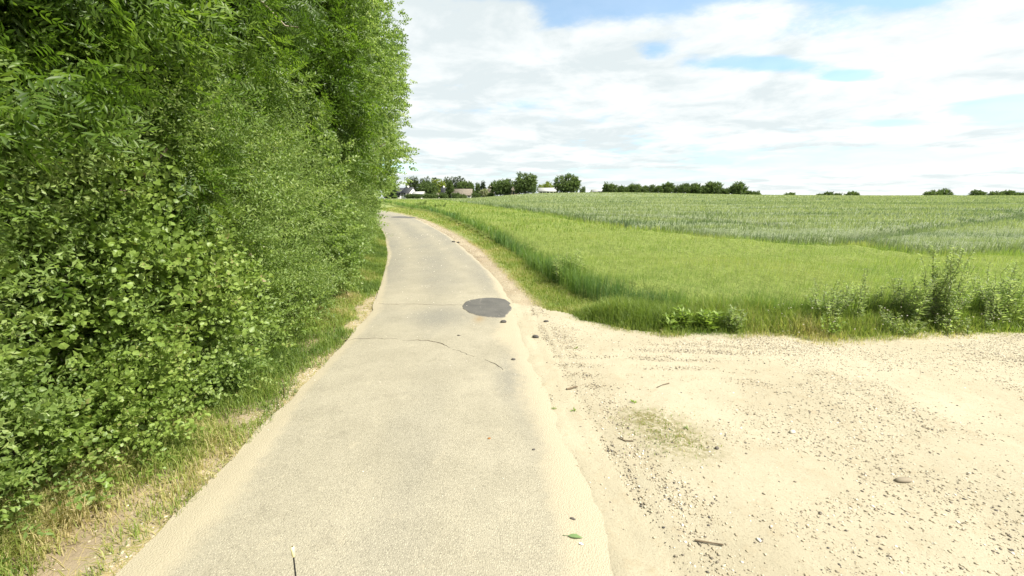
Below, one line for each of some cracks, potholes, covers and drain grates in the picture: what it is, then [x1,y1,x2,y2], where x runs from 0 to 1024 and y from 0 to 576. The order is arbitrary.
crack [344,338,503,370]
